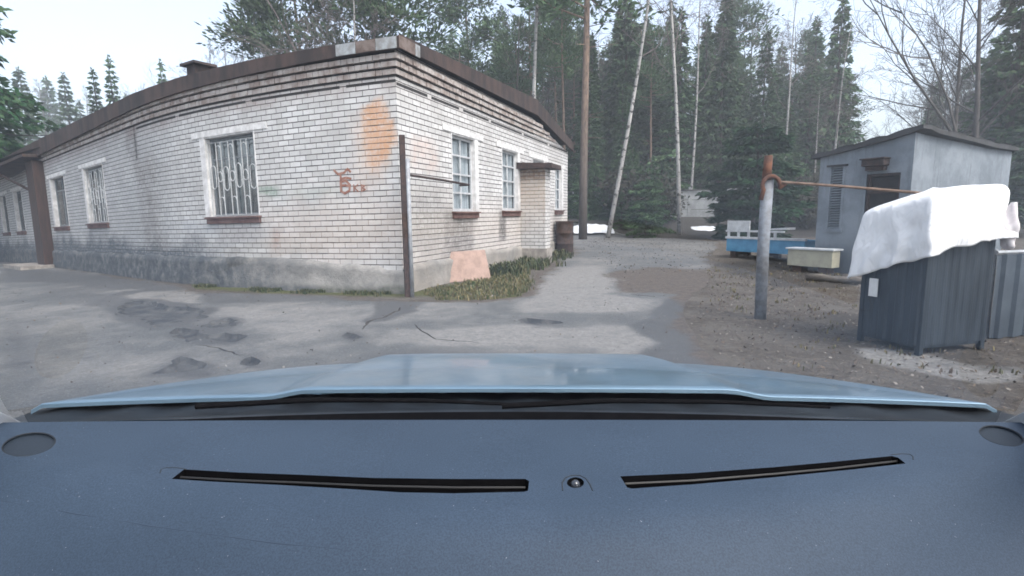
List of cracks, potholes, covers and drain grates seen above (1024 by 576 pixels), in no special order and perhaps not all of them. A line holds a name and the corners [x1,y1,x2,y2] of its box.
pothole [117,300,209,327]
pothole [240,356,261,366]
crack [362,308,477,343]
pothole [152,356,207,374]
pothole [169,327,247,342]
